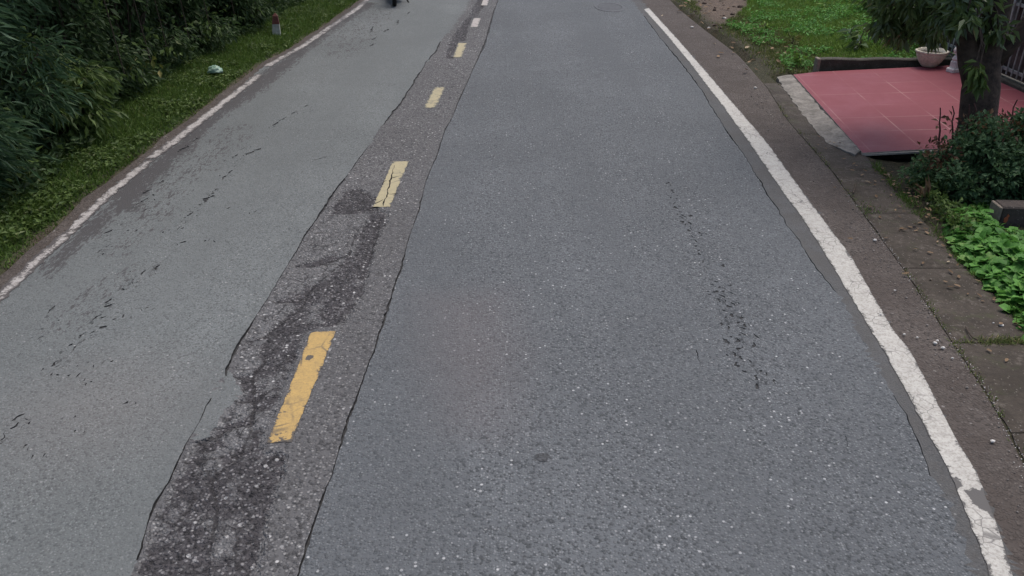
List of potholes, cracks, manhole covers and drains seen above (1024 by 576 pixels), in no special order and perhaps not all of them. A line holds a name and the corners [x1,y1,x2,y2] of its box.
crack [297,1,498,576]
manhole cover [594,2,625,12]
crack [644,16,930,475]
